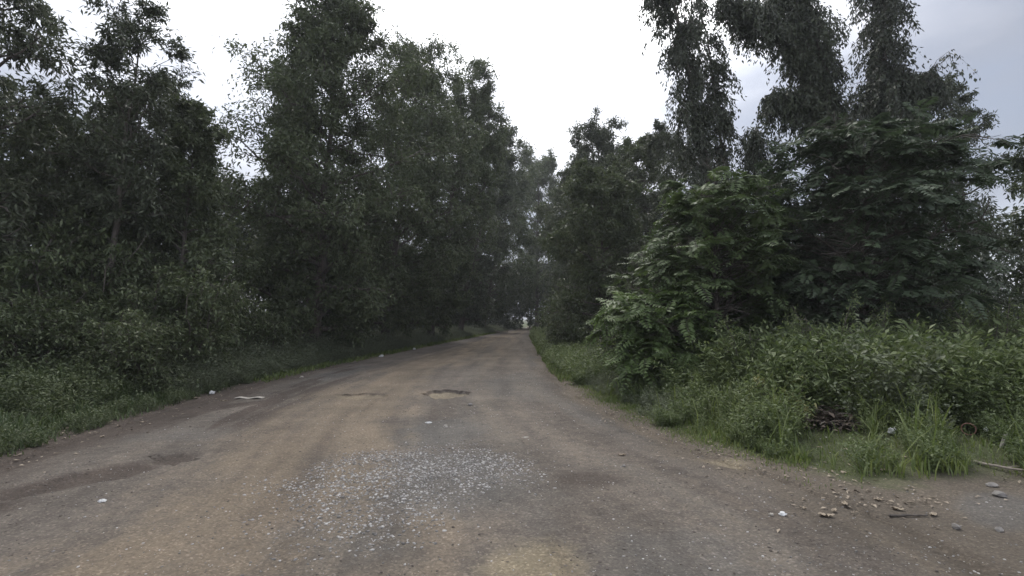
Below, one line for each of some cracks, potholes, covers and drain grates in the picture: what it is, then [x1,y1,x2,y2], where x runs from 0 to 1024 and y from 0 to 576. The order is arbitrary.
pothole [134,449,213,470]
pothole [324,392,398,401]
pothole [415,388,479,400]
